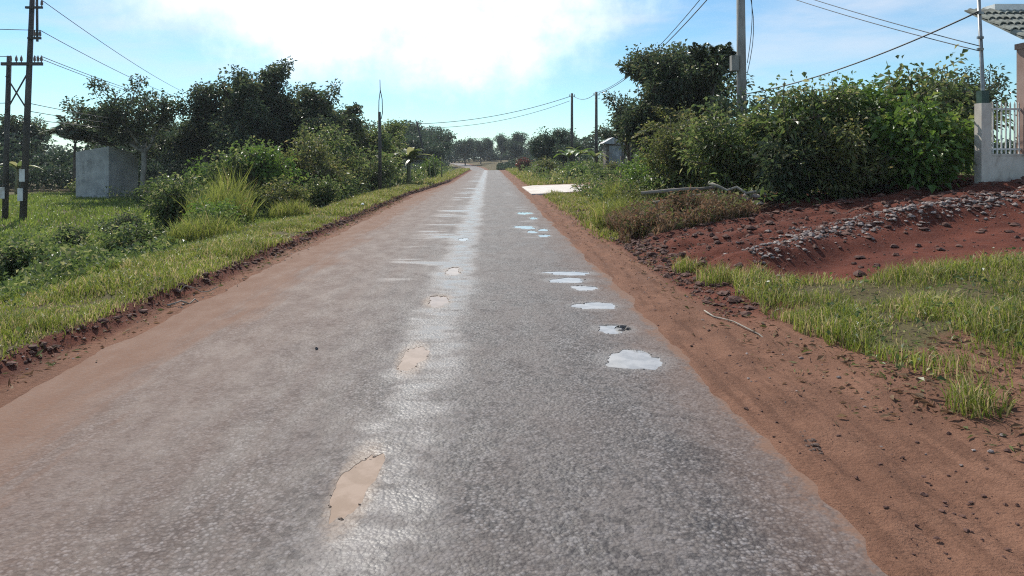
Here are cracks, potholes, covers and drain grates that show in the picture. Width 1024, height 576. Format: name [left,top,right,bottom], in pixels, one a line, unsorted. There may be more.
pothole [598,324,632,334]
pothole [397,346,430,372]
pothole [428,295,450,308]
pothole [603,349,666,370]
pothole [328,453,385,524]
